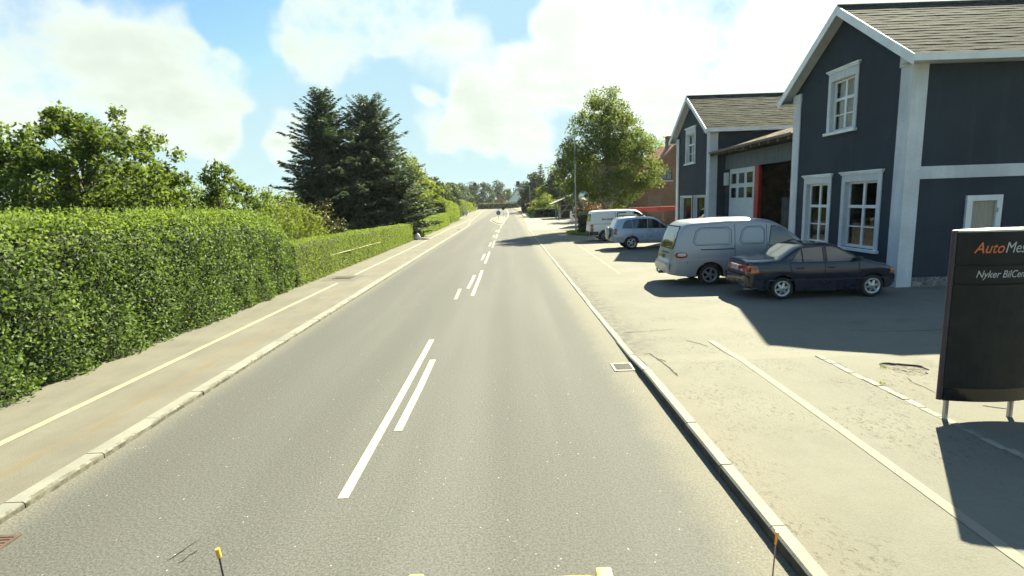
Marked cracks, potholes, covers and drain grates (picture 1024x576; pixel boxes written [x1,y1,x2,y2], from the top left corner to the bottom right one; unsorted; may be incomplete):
drain grate [0,534,22,550]
crack [647,340,706,376]
pothole [879,362,929,376]
drain grate [610,363,636,372]
